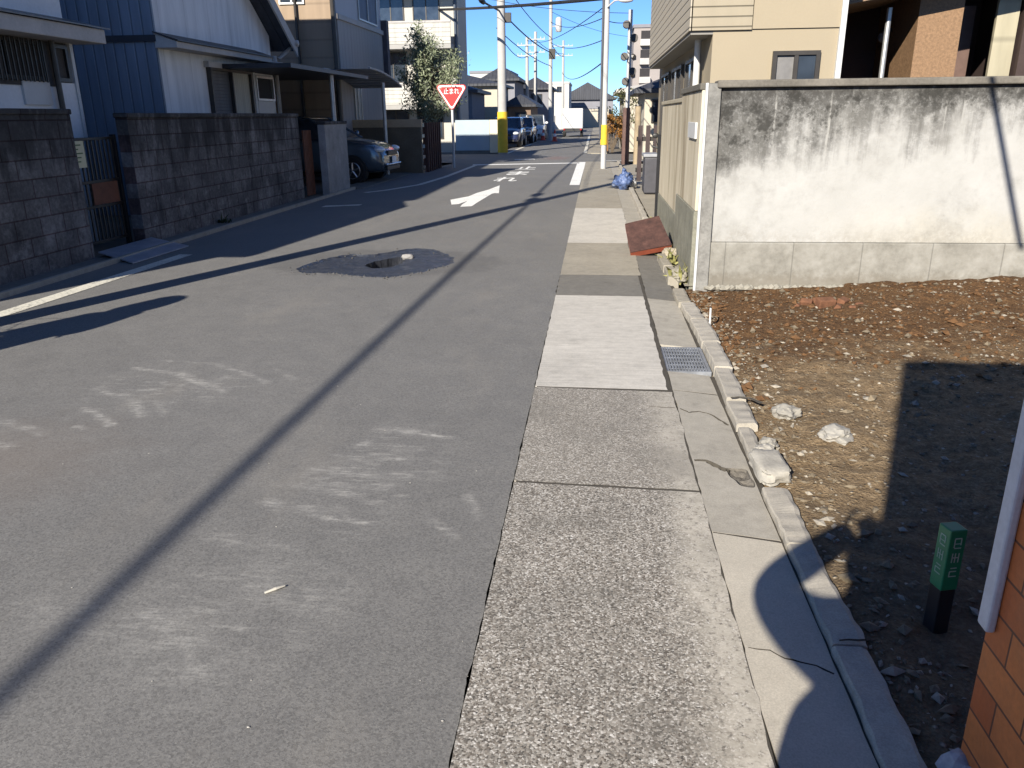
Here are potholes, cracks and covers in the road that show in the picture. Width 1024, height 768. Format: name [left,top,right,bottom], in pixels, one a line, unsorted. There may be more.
crack [694,459,755,488]
crack [748,639,867,675]
drain grate [661,347,712,377]
crack [649,406,729,425]
